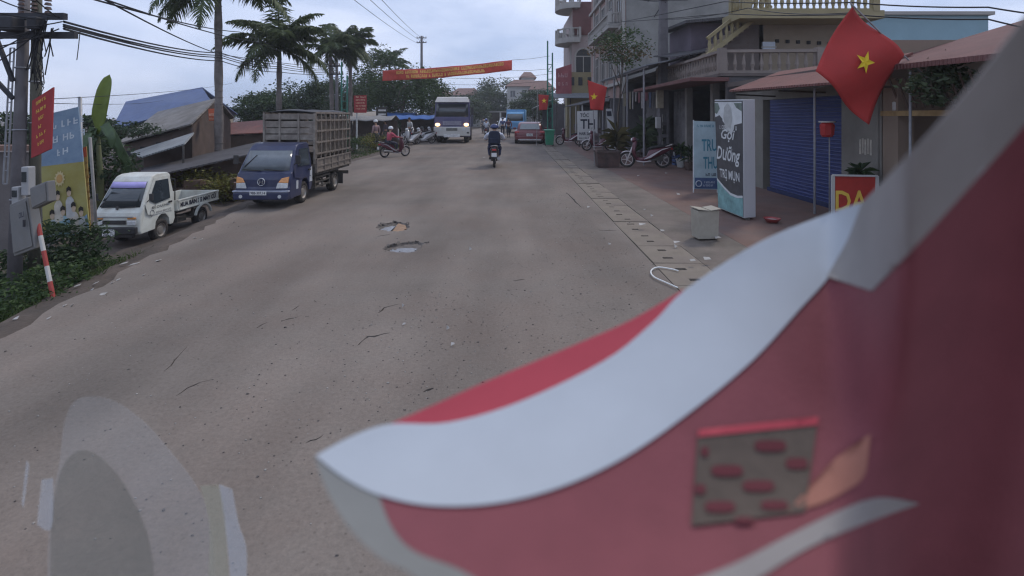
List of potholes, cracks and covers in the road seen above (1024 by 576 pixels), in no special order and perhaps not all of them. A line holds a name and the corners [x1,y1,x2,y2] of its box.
pothole [382,240,429,253]
pothole [376,220,410,231]
